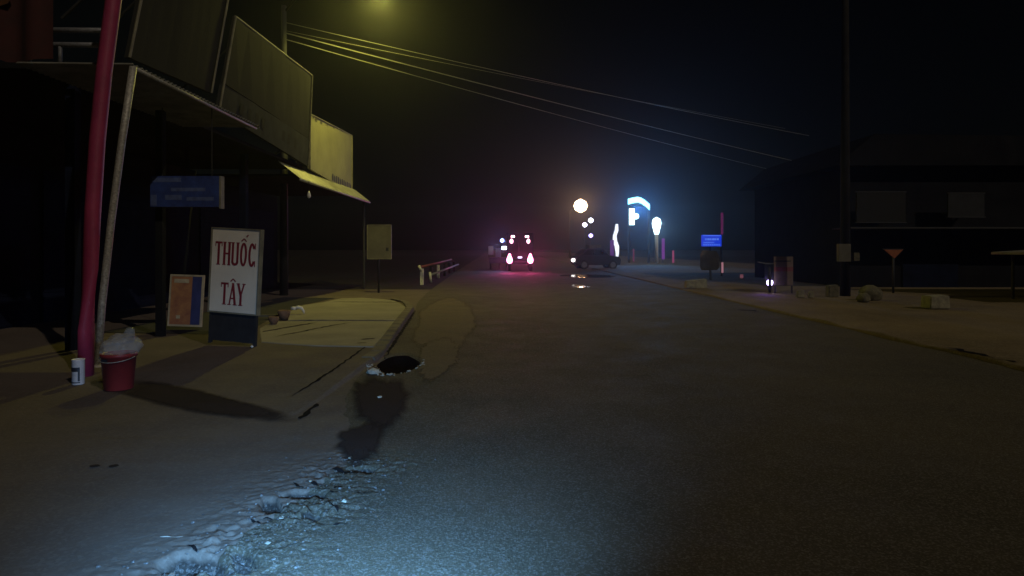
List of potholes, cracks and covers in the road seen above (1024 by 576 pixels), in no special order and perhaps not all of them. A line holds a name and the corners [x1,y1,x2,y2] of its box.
crack [293,467,374,525]
pothole [377,356,420,375]
